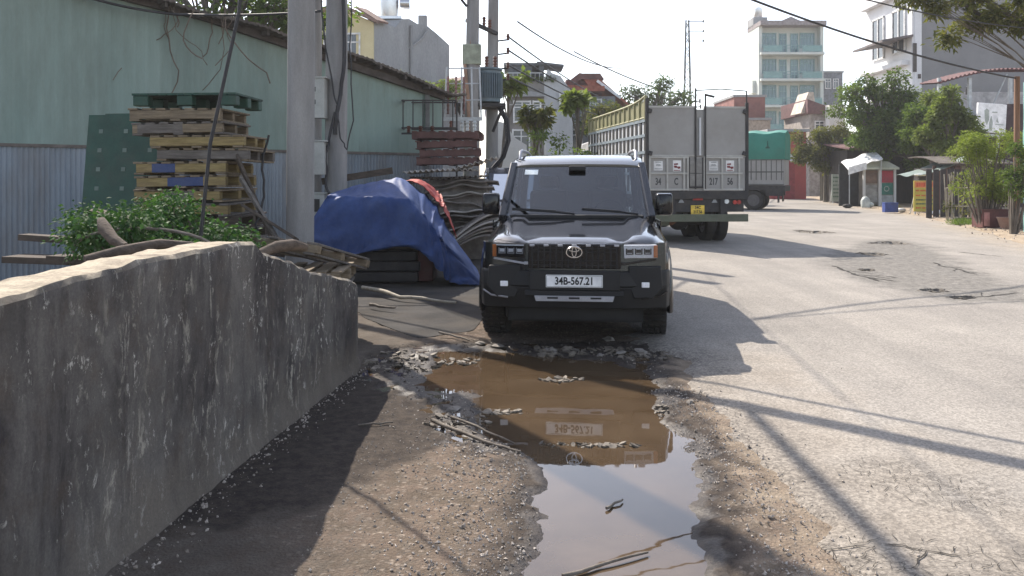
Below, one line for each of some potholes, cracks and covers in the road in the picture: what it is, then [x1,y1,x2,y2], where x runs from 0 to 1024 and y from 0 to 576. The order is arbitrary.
crack [820,535,1024,576]
crack [834,266,897,281]
crack [842,457,1020,515]
